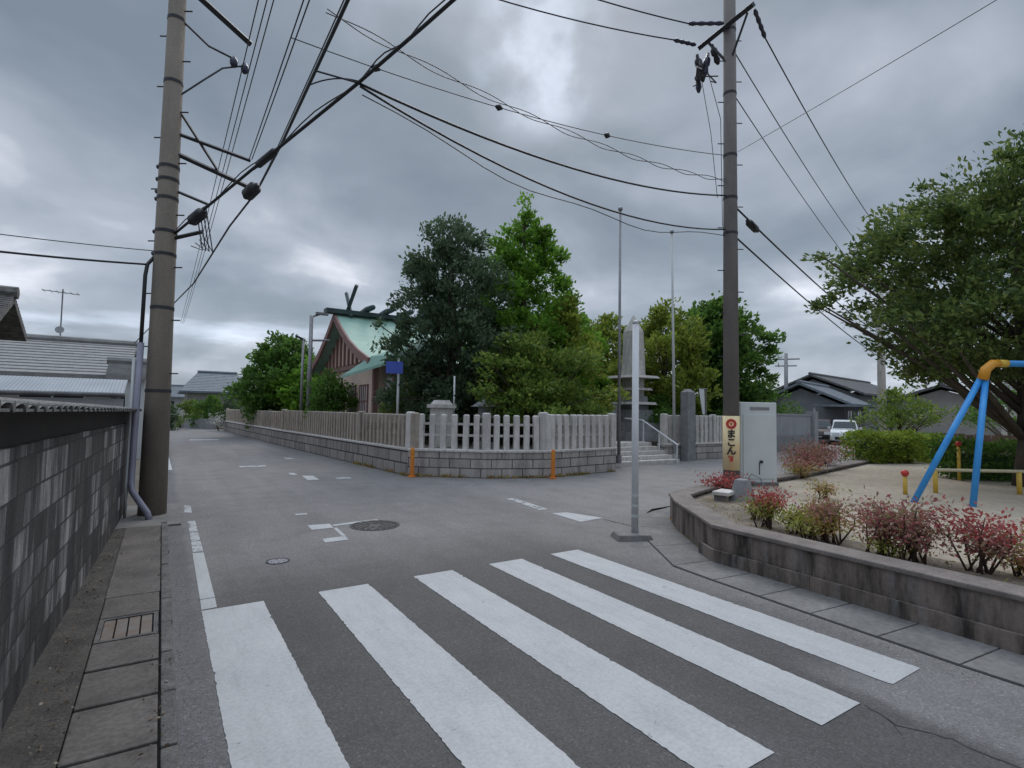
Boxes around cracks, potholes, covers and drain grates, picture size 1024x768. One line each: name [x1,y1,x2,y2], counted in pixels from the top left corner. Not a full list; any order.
manhole cover [350,520,400,531]
drain grate [93,611,158,645]
crack [865,705,1021,768]
